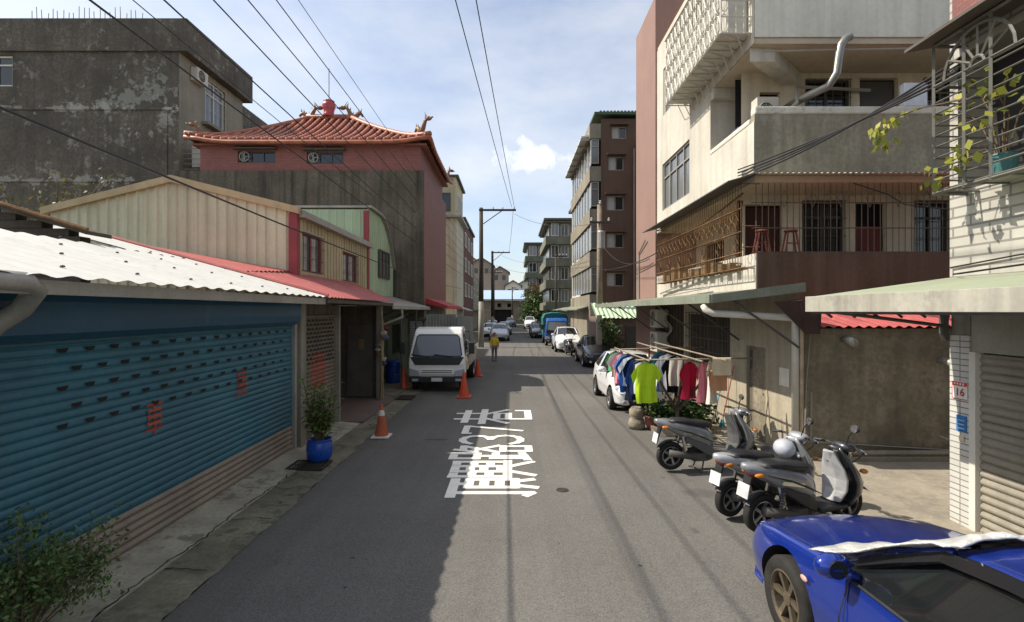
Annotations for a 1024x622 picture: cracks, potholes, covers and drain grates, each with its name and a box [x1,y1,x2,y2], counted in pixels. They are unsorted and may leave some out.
drain grate [285,460,333,471]
